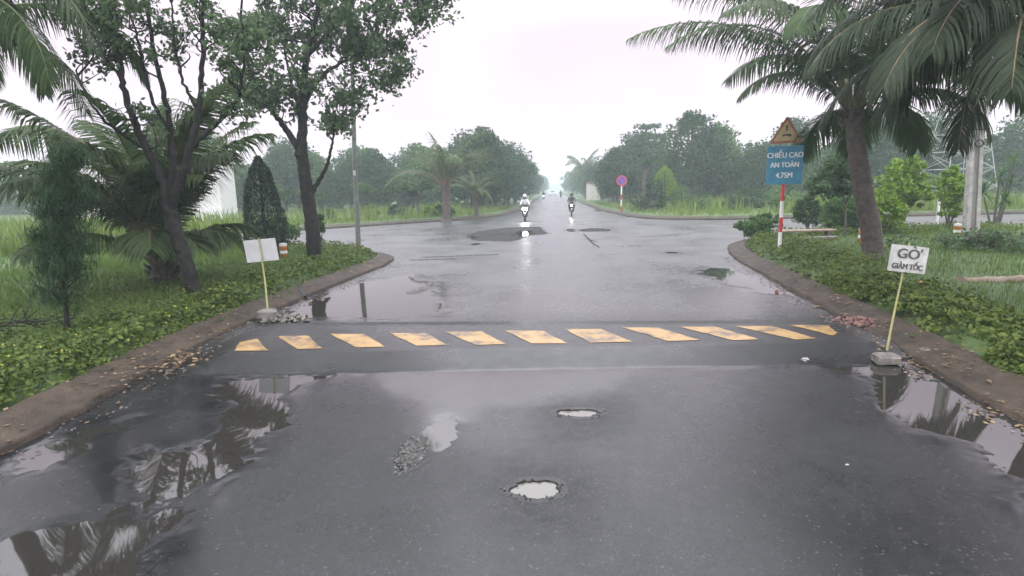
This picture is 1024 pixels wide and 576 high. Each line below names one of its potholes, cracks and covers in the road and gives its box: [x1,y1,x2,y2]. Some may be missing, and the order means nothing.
pothole [549,407,609,420]
pothole [499,476,569,504]
pothole [384,433,436,480]
